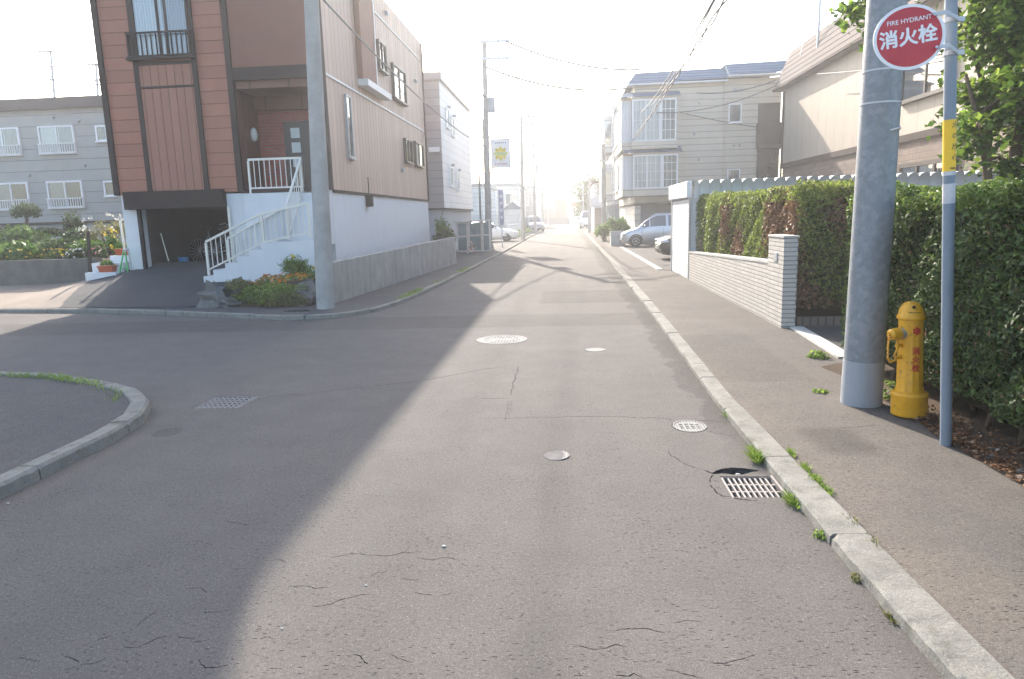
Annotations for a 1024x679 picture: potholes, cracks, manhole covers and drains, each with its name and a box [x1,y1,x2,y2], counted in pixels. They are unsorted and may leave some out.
manhole cover [672,420,707,432]
manhole cover [476,335,527,344]
crack [250,366,732,436]
manhole cover [544,451,569,461]
drain grate [721,475,787,497]
pothole [705,467,758,475]
crack [668,449,755,501]
crack [578,620,700,649]
crack [96,611,209,648]
drain grate [194,396,258,408]
